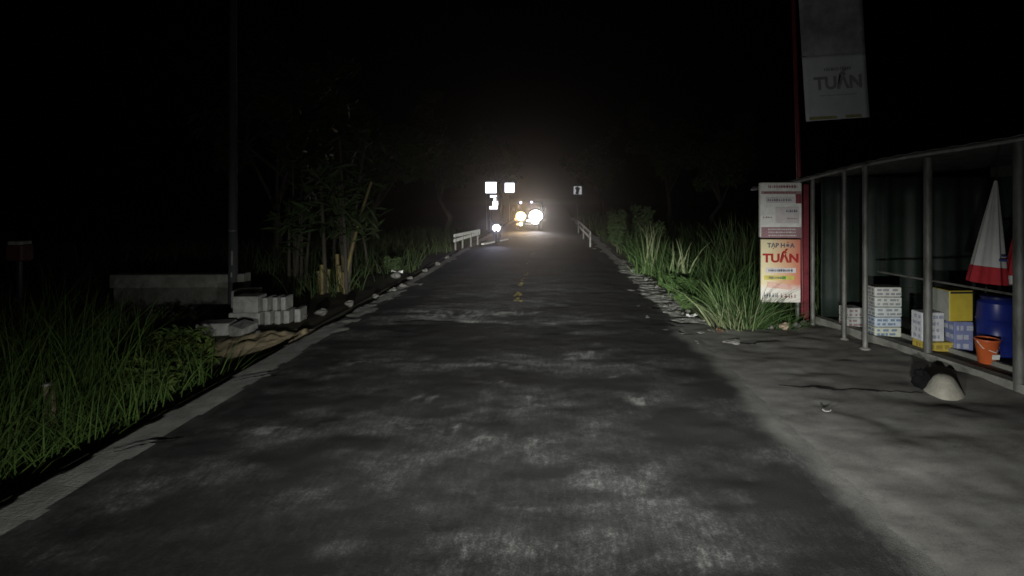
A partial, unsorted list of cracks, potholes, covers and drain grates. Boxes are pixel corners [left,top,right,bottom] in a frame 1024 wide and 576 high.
crack [114,438,183,452]
crack [782,385,920,393]
